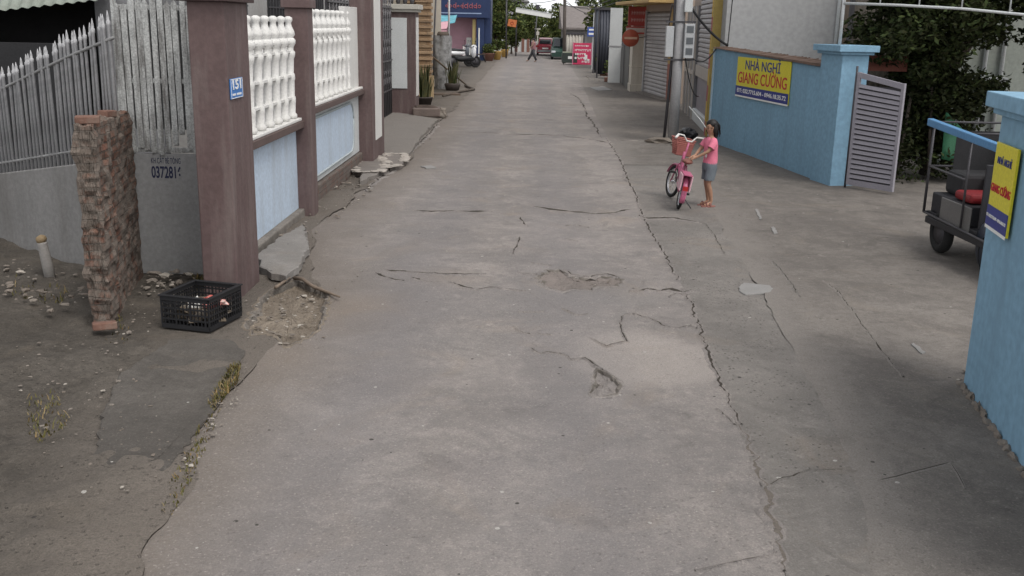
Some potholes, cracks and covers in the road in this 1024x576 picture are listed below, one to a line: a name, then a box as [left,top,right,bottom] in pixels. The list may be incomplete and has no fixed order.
pothole [529,268,628,293]
pothole [241,280,332,348]
crack [374,92,800,425]
pothole [587,368,625,398]
crack [822,280,904,377]
crack [695,551,777,572]
